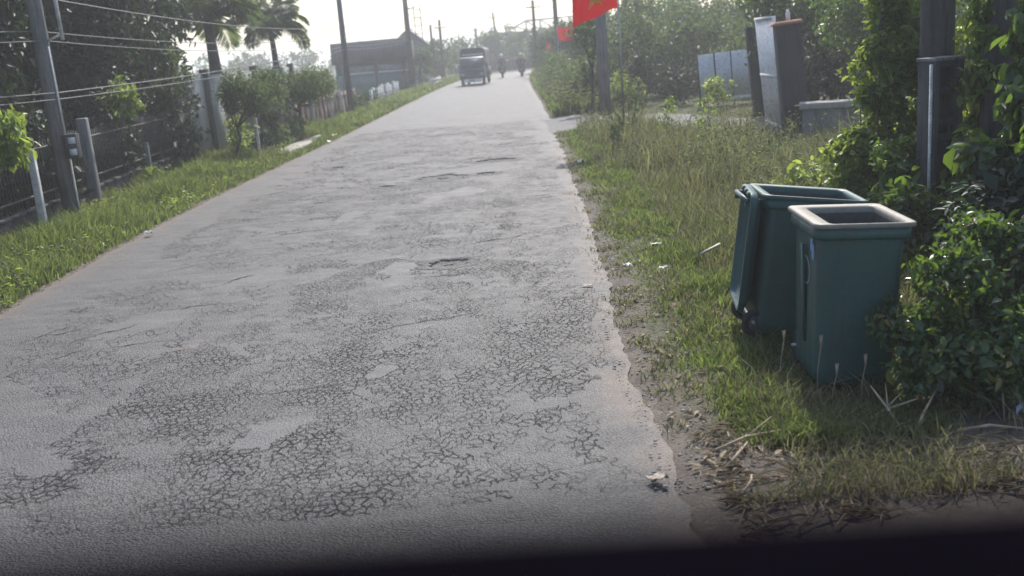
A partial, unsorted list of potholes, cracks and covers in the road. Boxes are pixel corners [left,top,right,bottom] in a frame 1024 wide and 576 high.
crack [0,258,657,535]
pothole [413,172,473,182]
pothole [416,256,481,270]
